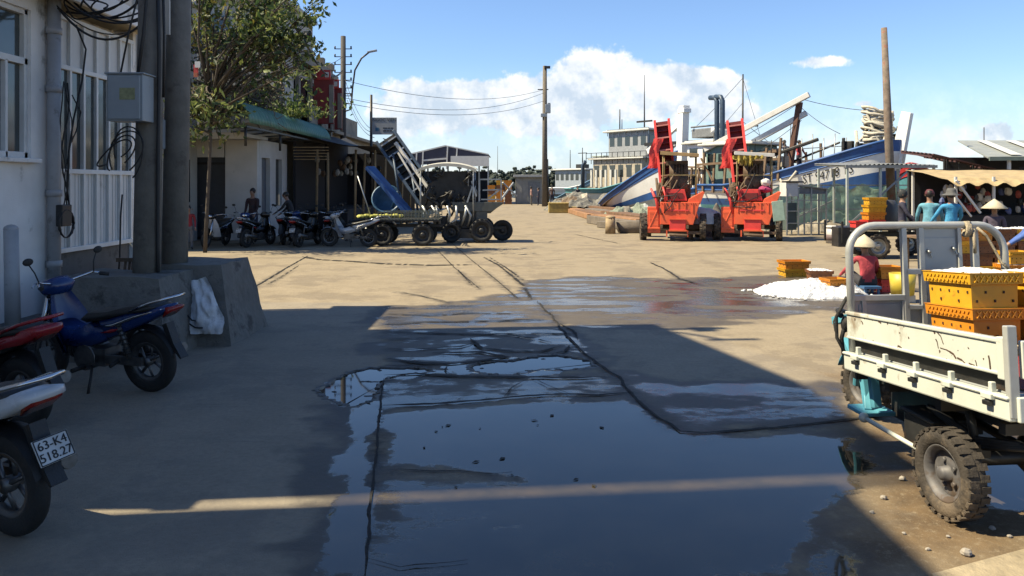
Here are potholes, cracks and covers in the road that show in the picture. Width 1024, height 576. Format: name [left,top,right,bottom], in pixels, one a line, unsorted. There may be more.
crack [386,291,871,433]
crack [302,256,471,265]
